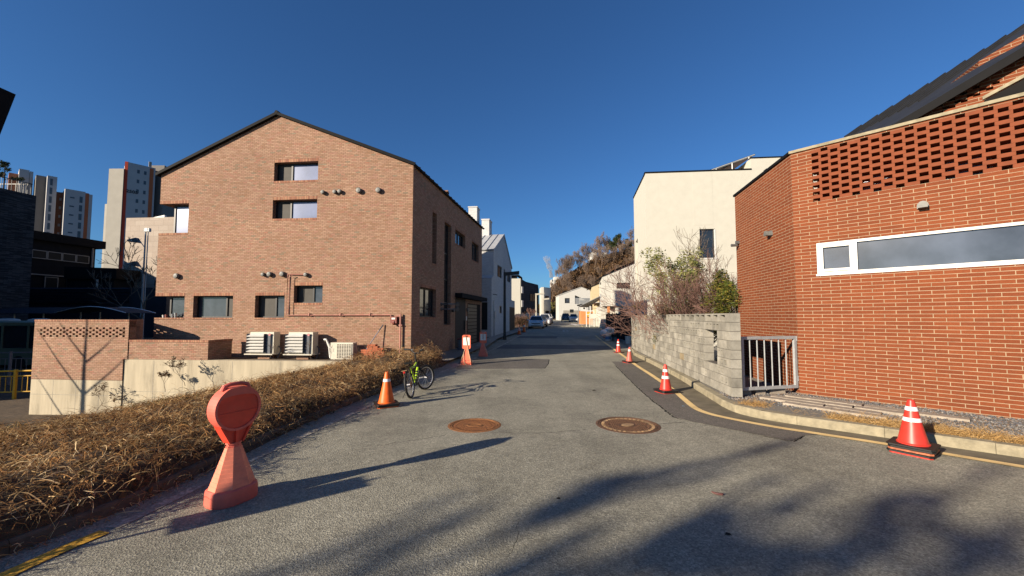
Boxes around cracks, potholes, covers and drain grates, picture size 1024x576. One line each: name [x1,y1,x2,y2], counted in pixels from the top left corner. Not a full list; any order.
manhole cover [448,418,501,433]
manhole cover [596,417,661,434]
